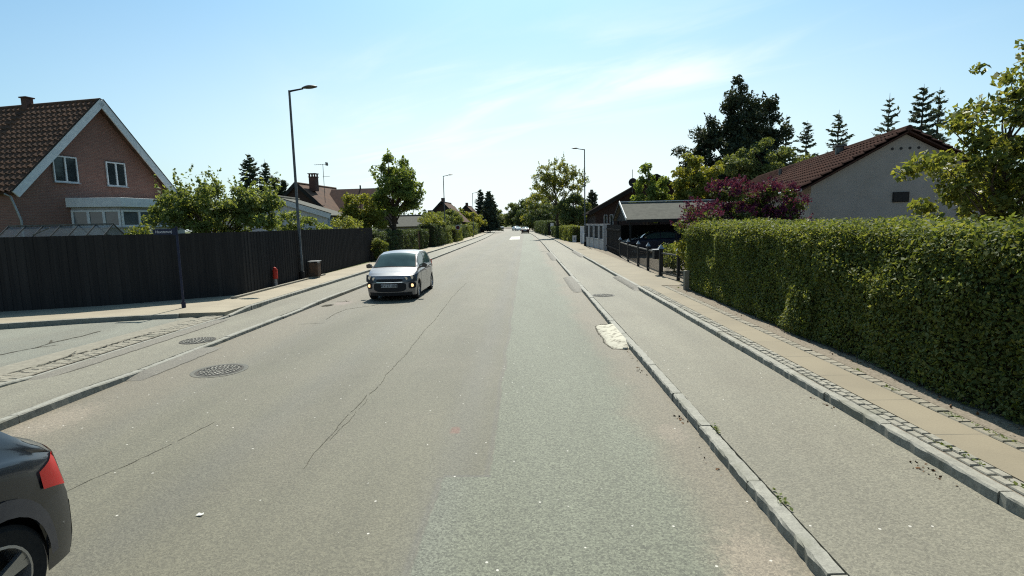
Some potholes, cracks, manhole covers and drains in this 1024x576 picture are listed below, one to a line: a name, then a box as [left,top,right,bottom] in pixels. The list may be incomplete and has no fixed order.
crack [303,287,462,469]
crack [68,422,214,491]
manhole cover [190,363,249,378]
crack [0,331,99,355]
